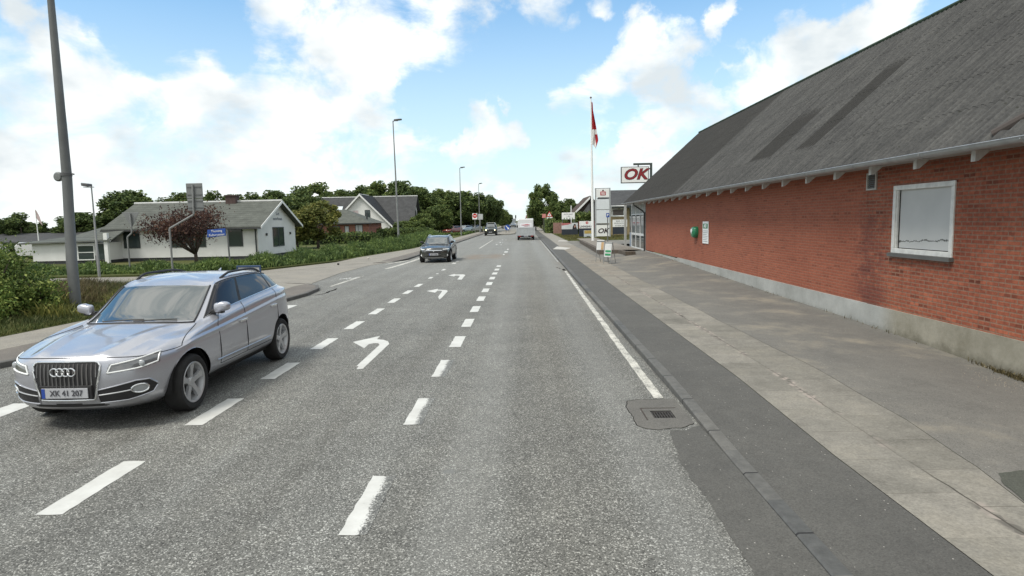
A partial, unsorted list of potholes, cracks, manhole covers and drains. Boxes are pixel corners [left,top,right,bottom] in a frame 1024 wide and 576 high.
drain grate [640,407,676,430]
